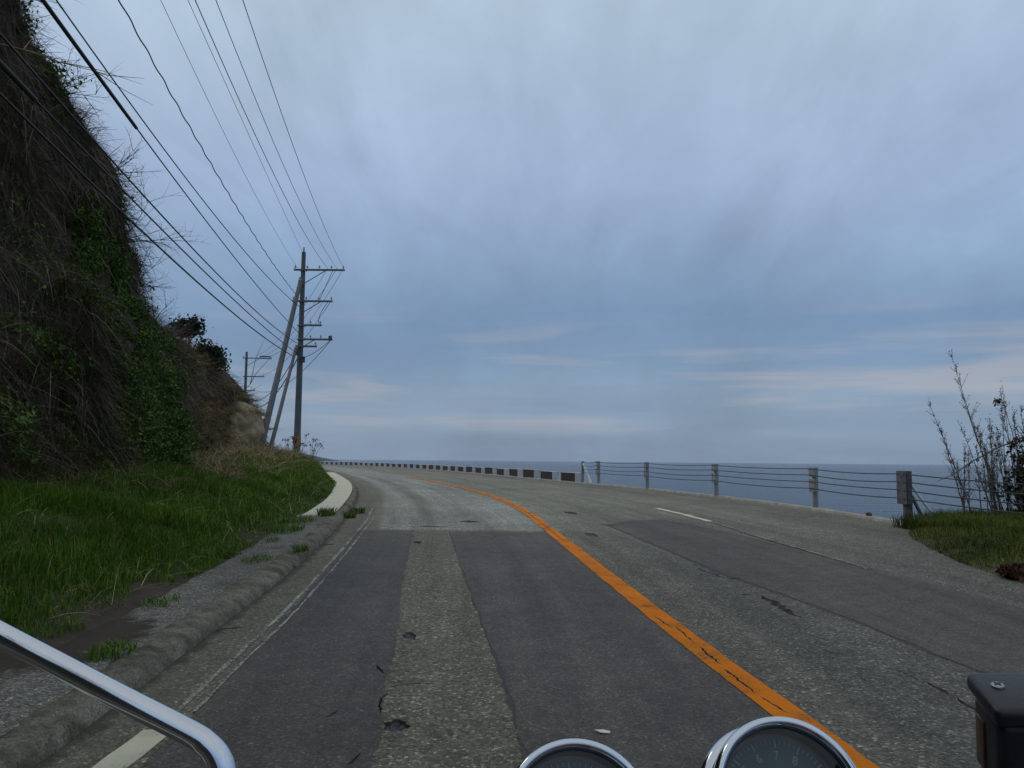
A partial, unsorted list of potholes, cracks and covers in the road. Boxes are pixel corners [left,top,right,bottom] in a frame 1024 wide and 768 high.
crack [376,665,432,713]
crack [698,568,801,618]
pothole [383,719,411,732]
crack [654,616,789,714]
crack [887,667,975,711]
